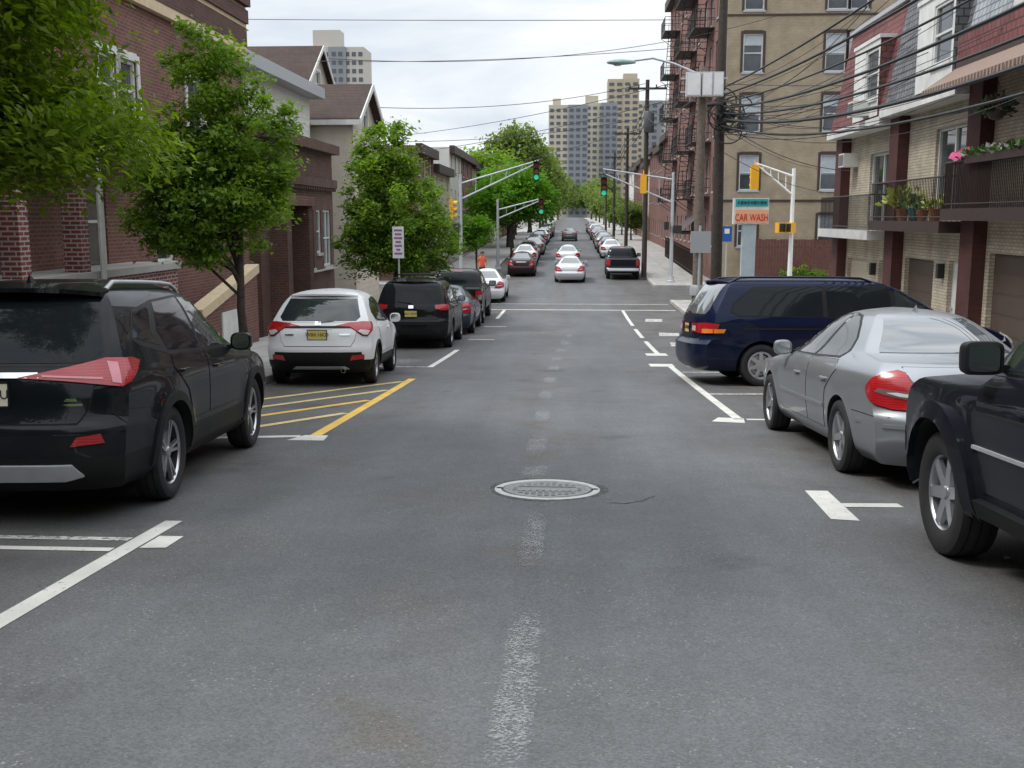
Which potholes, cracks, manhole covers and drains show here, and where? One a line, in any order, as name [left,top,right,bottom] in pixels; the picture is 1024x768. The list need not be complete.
manhole cover [490,478,608,502]
